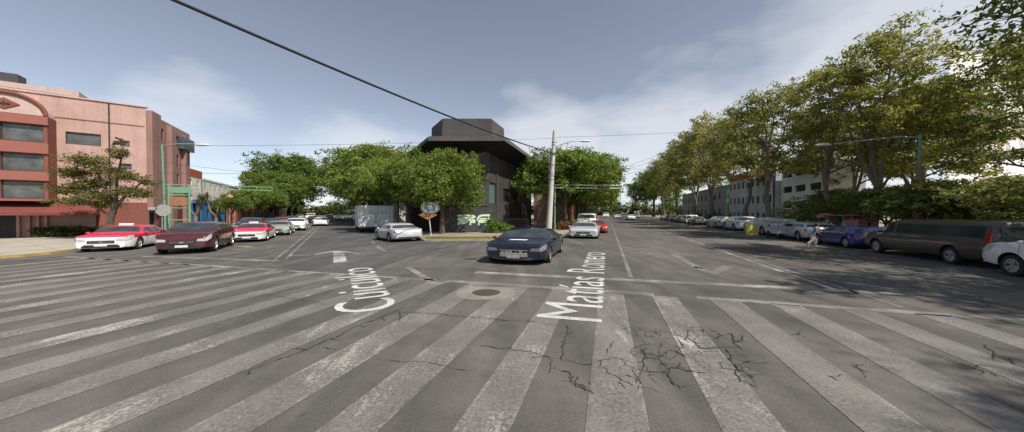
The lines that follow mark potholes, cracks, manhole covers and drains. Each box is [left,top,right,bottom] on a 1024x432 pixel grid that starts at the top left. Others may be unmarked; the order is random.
manhole cover [457,287,515,300]
crack [242,305,547,375]
crack [952,342,1024,380]
crack [476,326,770,394]
